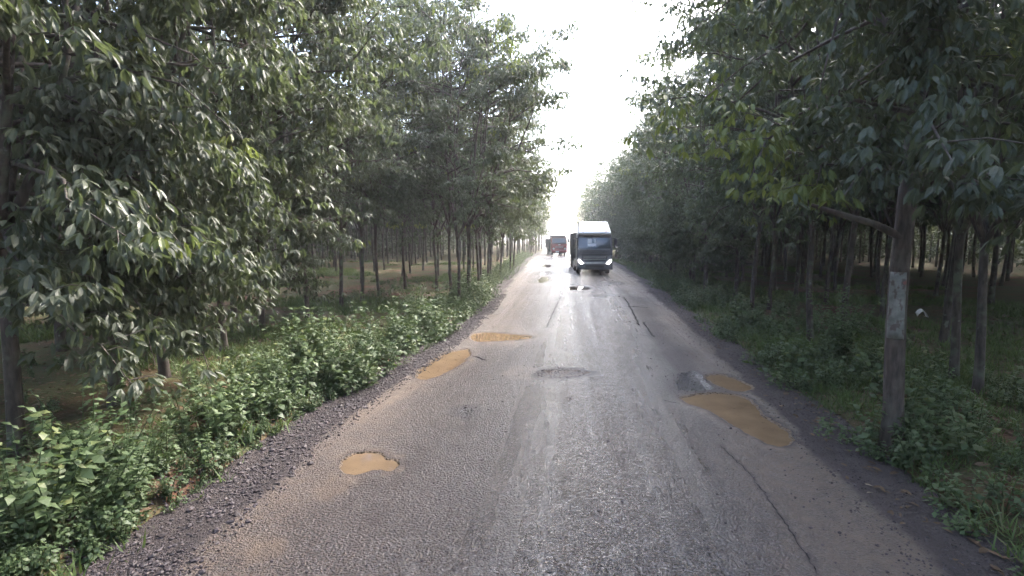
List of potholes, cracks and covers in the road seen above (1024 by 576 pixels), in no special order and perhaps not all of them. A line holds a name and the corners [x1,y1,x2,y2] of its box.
pothole [412,348,472,380]
pothole [534,367,601,378]
pothole [696,373,757,392]
pothole [333,451,400,477]
pothole [678,391,802,447]
crack [623,297,655,337]
pothole [469,332,533,342]
crack [720,445,817,574]
pothole [667,370,723,393]
